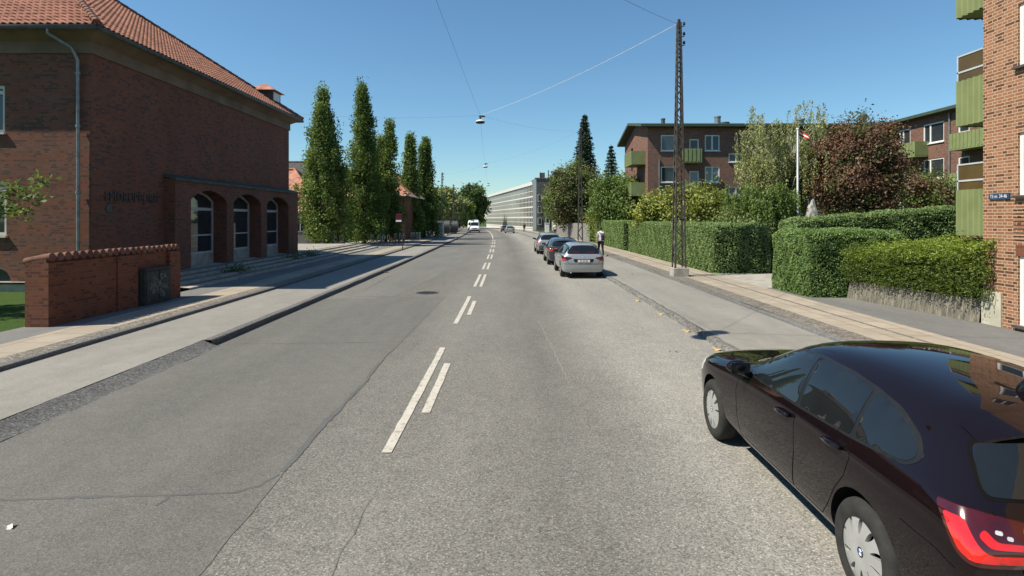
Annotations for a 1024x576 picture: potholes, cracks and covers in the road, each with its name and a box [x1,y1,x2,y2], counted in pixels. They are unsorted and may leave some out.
crack [331,490,377,576]
